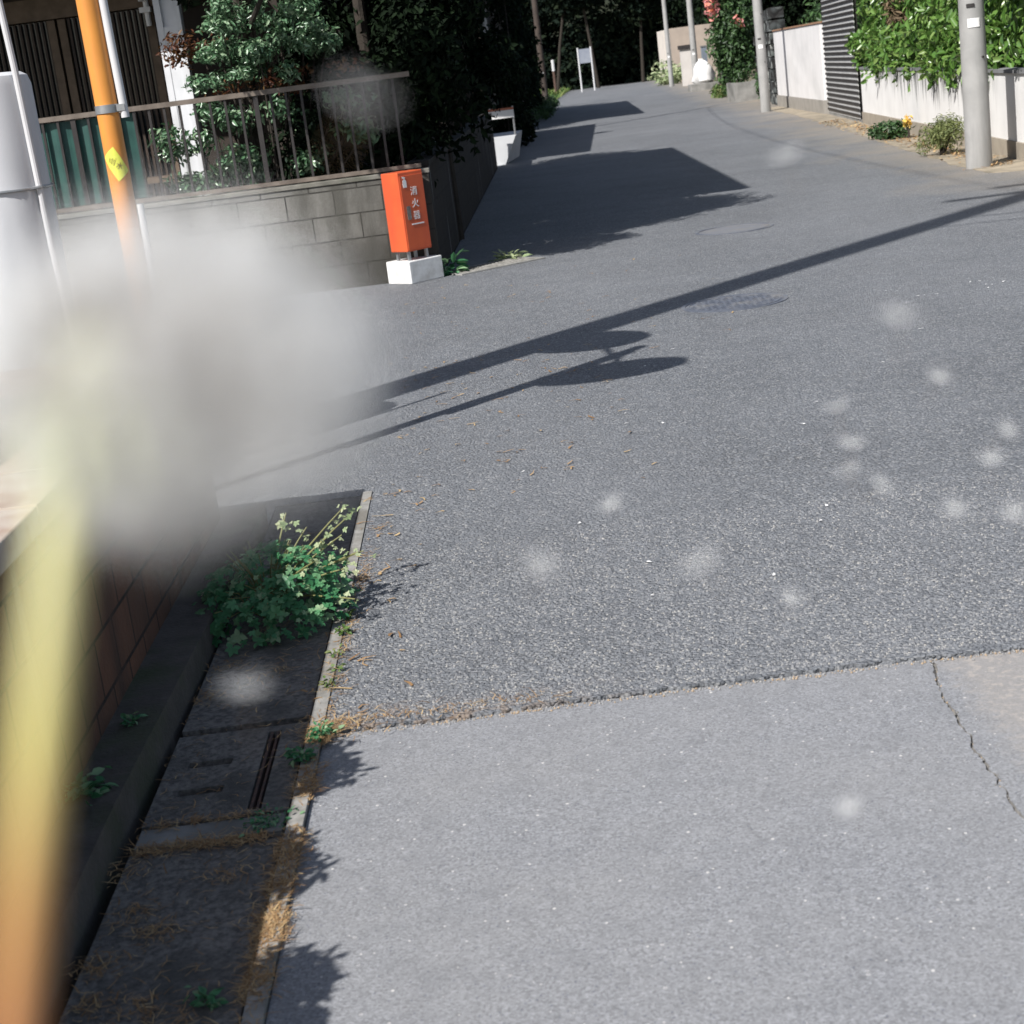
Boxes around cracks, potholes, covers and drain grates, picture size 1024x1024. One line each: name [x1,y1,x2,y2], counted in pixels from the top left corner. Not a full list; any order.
manhole cover [695,223,774,235]
manhole cover [681,293,788,313]
crack [930,661,1024,819]
